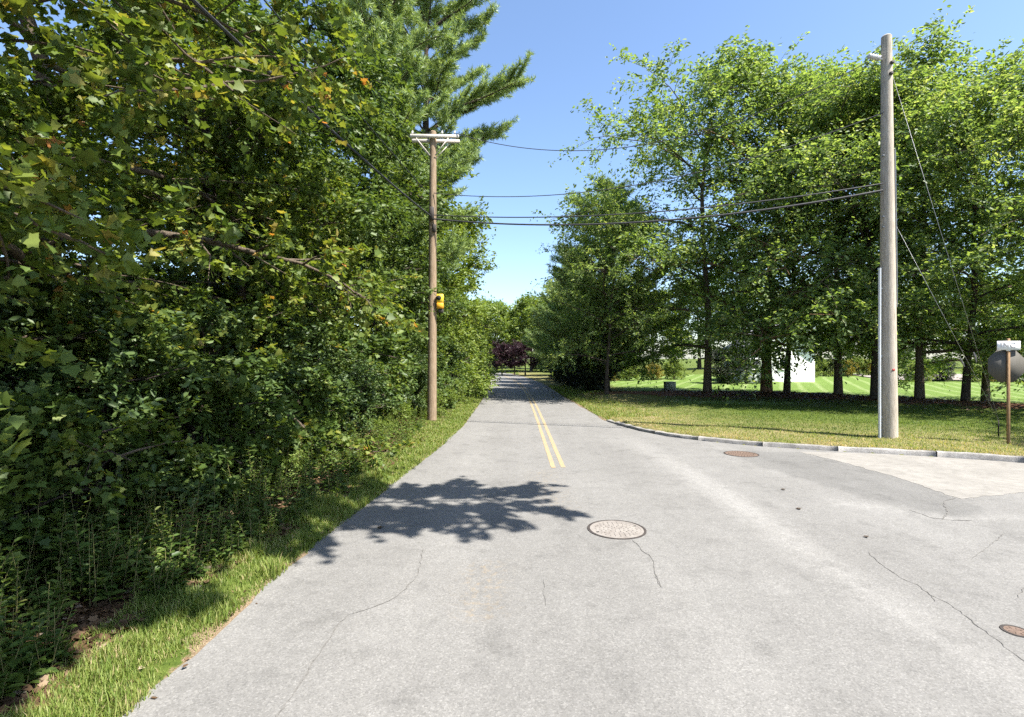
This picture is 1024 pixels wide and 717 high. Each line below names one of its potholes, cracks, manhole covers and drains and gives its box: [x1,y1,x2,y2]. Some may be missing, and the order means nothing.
manhole cover [587,520,647,540]
crack [869,553,1023,660]
utility cover [999,624,1024,638]
crack [276,550,423,717]
